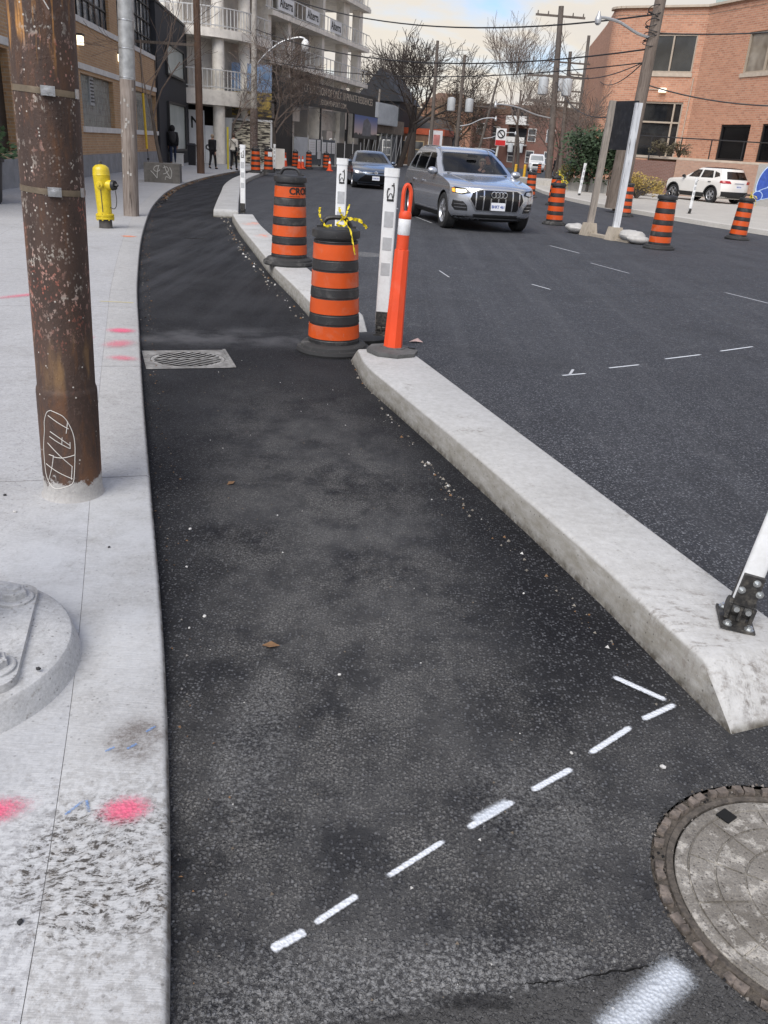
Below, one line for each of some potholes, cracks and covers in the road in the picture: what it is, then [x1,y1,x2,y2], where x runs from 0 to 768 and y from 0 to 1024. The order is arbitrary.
manhole cover [650,785,768,1011]
drain grate [142,349,236,370]
